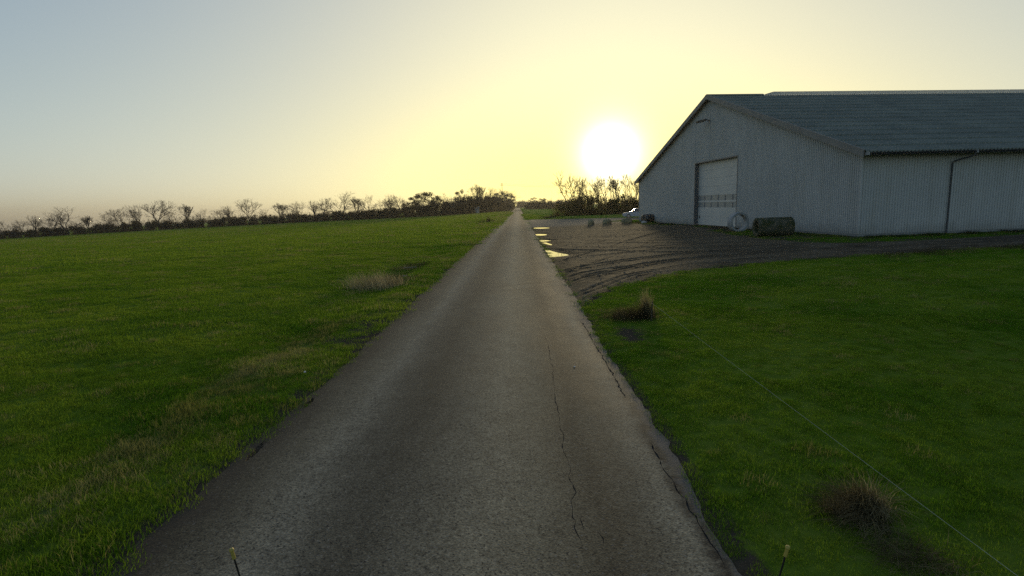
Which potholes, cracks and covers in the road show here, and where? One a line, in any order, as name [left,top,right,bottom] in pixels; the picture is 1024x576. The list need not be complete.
crack [548,348,604,546]
crack [652,445,728,572]
crack [581,322,625,396]
